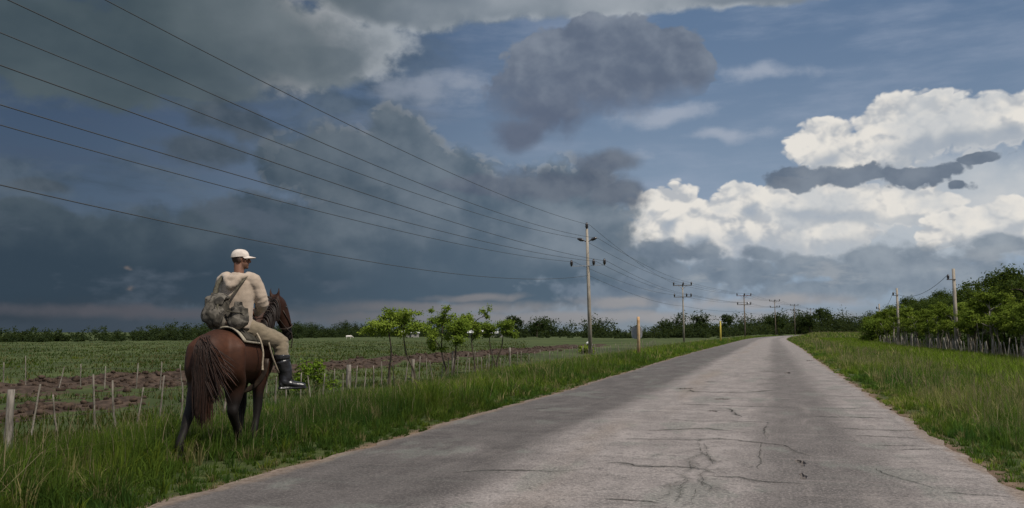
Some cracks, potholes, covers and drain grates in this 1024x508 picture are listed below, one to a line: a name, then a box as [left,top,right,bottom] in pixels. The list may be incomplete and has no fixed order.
crack [611,404,789,500]
